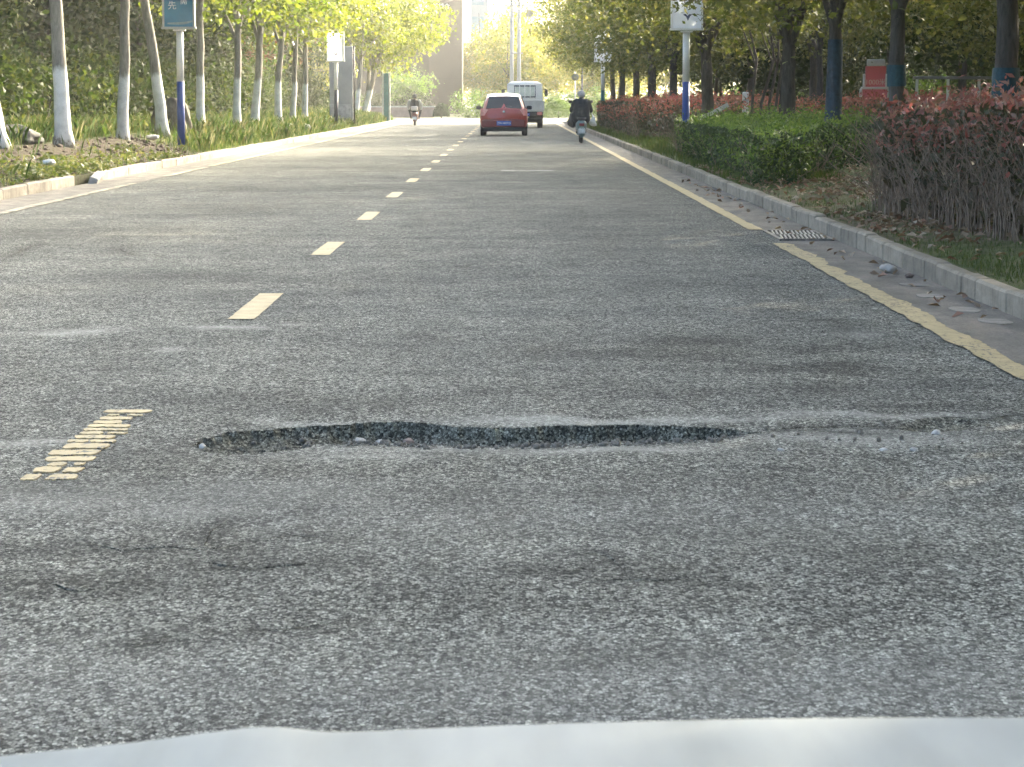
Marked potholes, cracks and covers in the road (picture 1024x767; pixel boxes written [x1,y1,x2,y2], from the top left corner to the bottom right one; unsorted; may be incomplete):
drain grate [763,230,835,241]
crack [0,578,144,592]
pothole [189,421,765,455]
crack [65,518,332,569]
